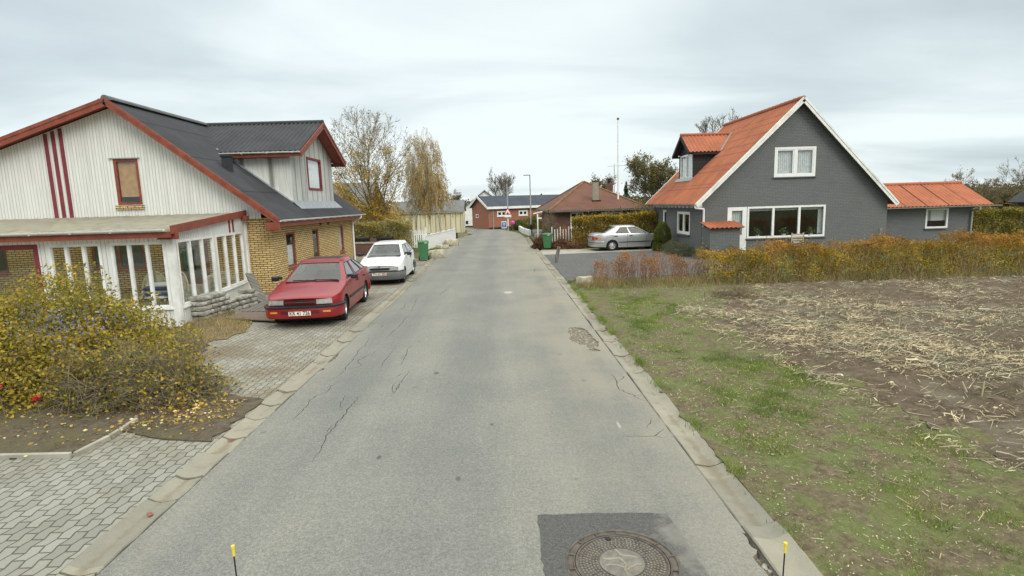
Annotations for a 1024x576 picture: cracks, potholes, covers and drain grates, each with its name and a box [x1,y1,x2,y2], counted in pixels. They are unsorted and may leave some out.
manhole cover [565,530,681,576]
crack [296,301,416,460]
